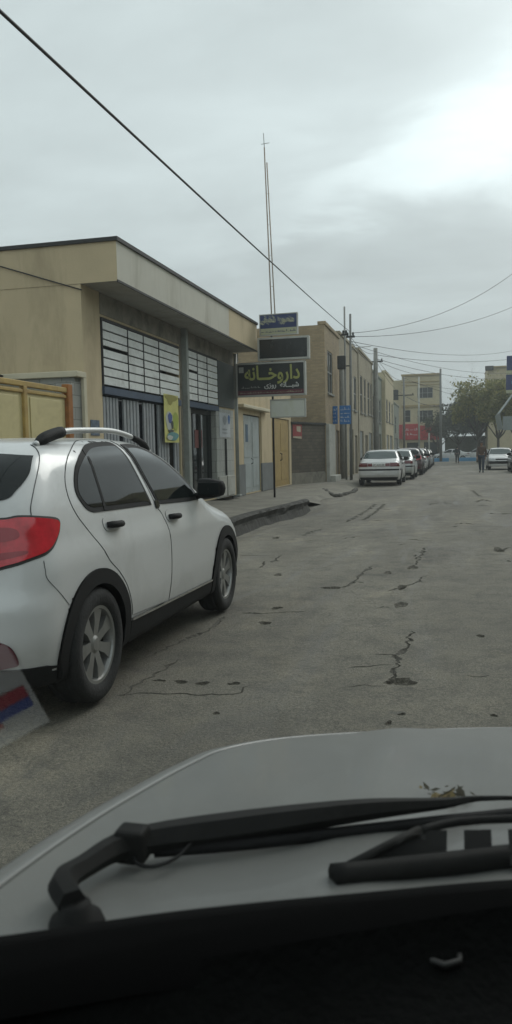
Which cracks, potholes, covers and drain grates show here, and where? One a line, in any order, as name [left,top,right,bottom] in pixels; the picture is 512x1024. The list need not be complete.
crack [349,631,415,687]
crack [376,539,426,609]
crack [344,504,389,539]
crack [342,566,372,588]
crack [117,616,248,696]
